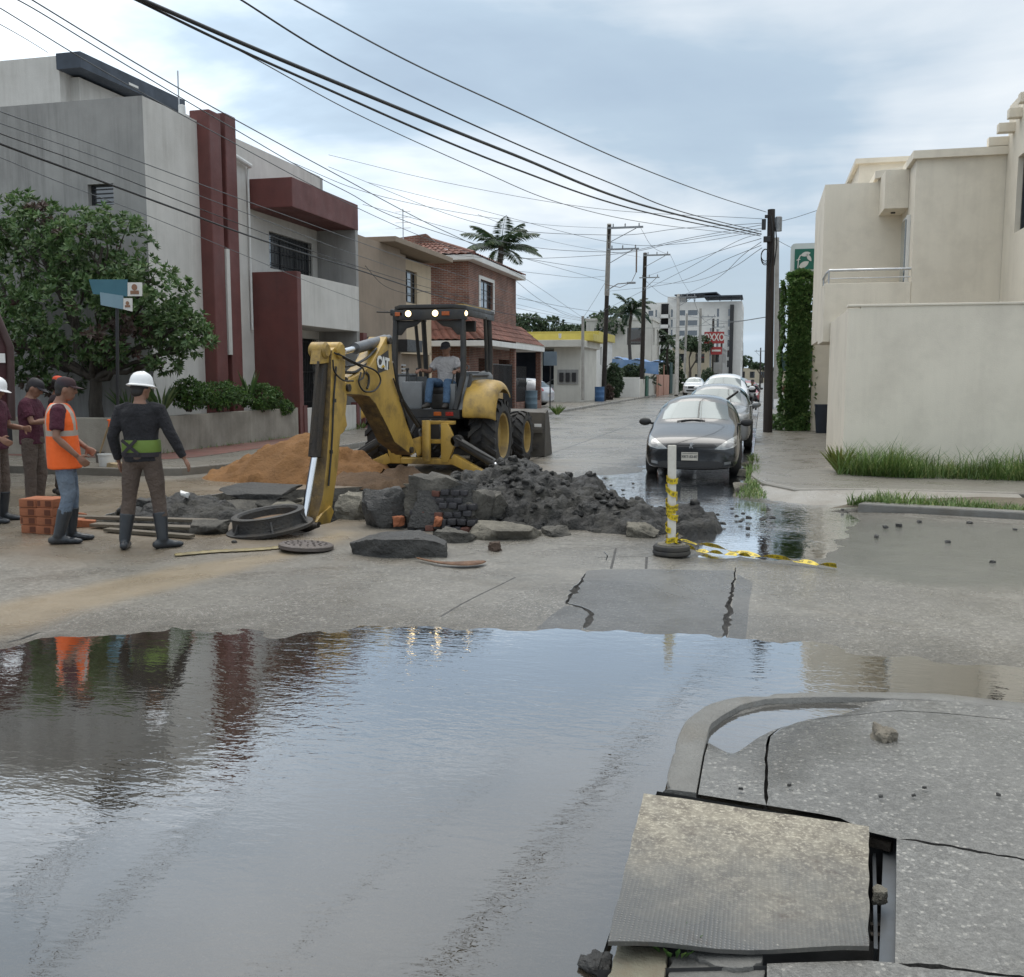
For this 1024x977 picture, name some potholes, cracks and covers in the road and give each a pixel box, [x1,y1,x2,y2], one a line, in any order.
manhole cover [278,540,334,552]
crack [722,567,736,637]
crack [565,551,608,628]
crack [902,839,1024,861]
